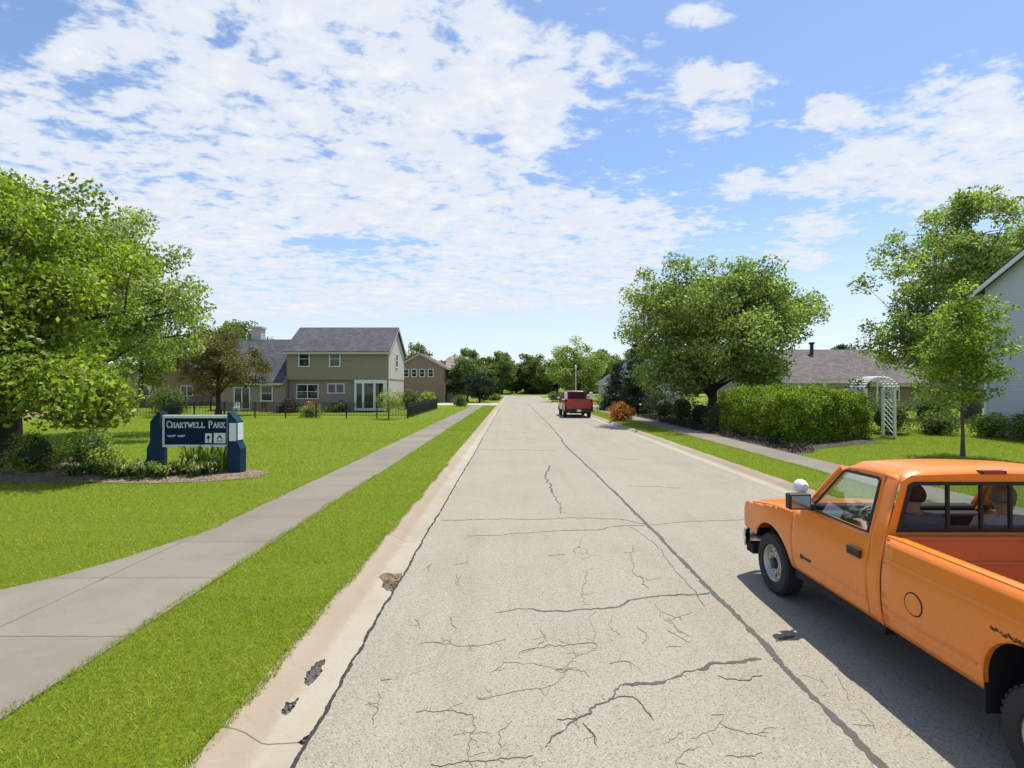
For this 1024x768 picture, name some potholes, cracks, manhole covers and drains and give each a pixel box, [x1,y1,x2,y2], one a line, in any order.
crack [290,411,745,768]
pothole [304,659,325,686]
pothole [281,697,299,715]
pothole [379,573,402,592]
crack [590,714,774,768]
crack [803,673,876,732]
